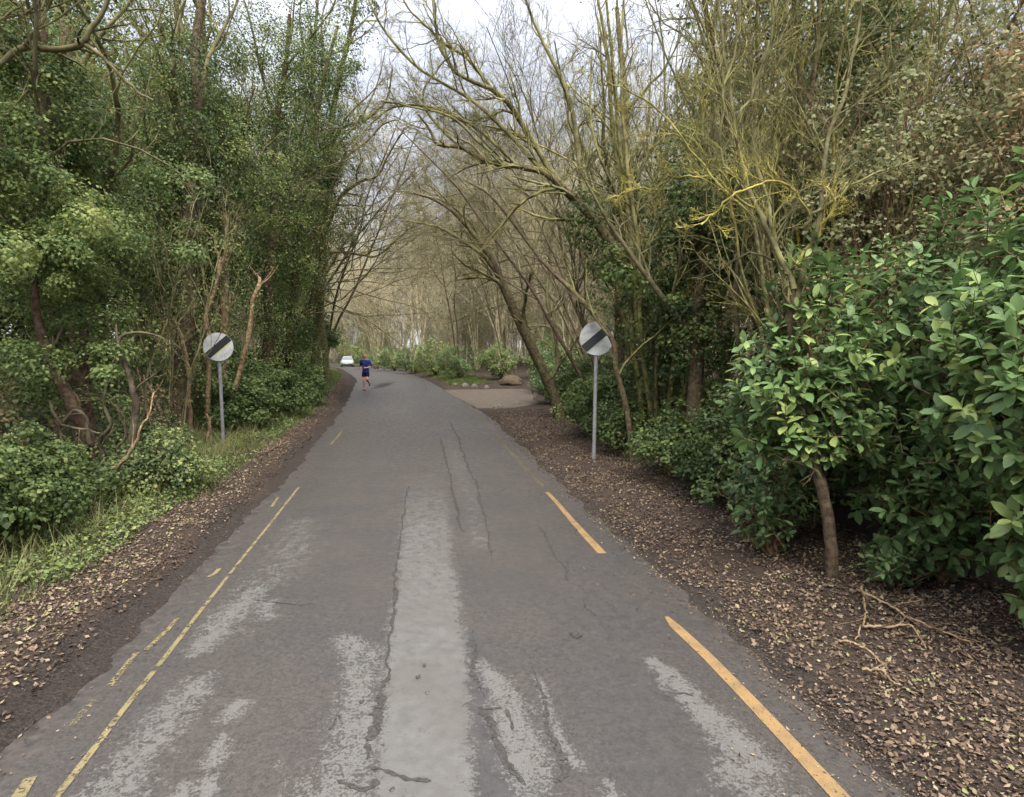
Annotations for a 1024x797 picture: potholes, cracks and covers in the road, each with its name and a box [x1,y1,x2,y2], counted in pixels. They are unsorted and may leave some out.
crack [337,487,431,791]
crack [469,630,570,785]
crack [450,423,504,561]
crack [539,527,569,581]
